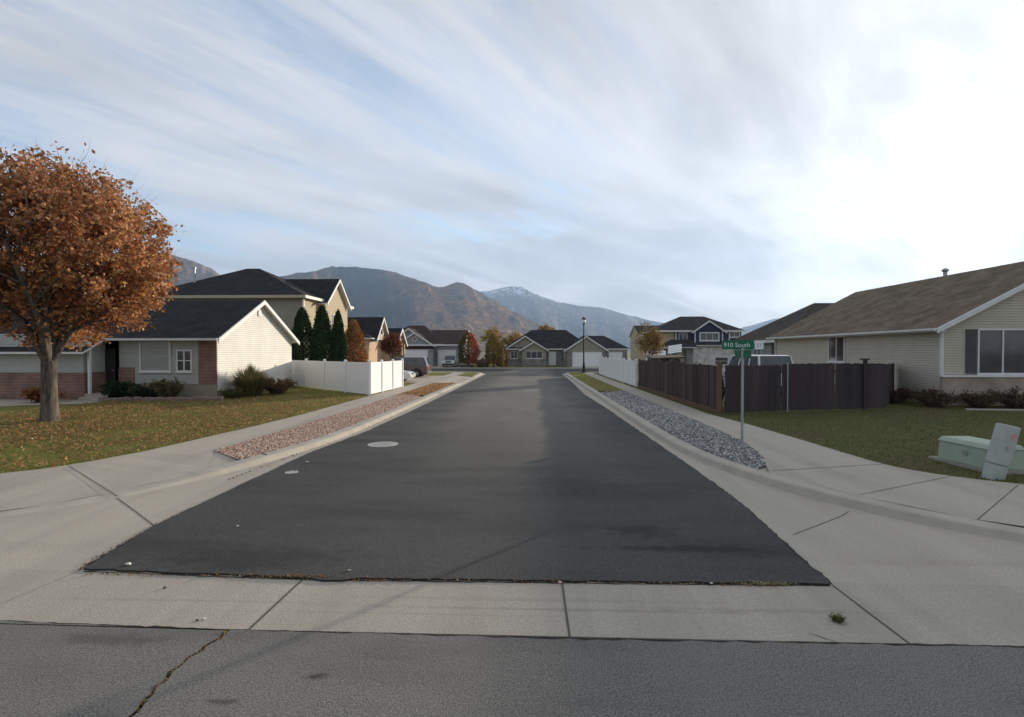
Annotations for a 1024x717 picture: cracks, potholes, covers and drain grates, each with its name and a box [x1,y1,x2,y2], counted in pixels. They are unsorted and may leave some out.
crack [4,620,1024,717]
